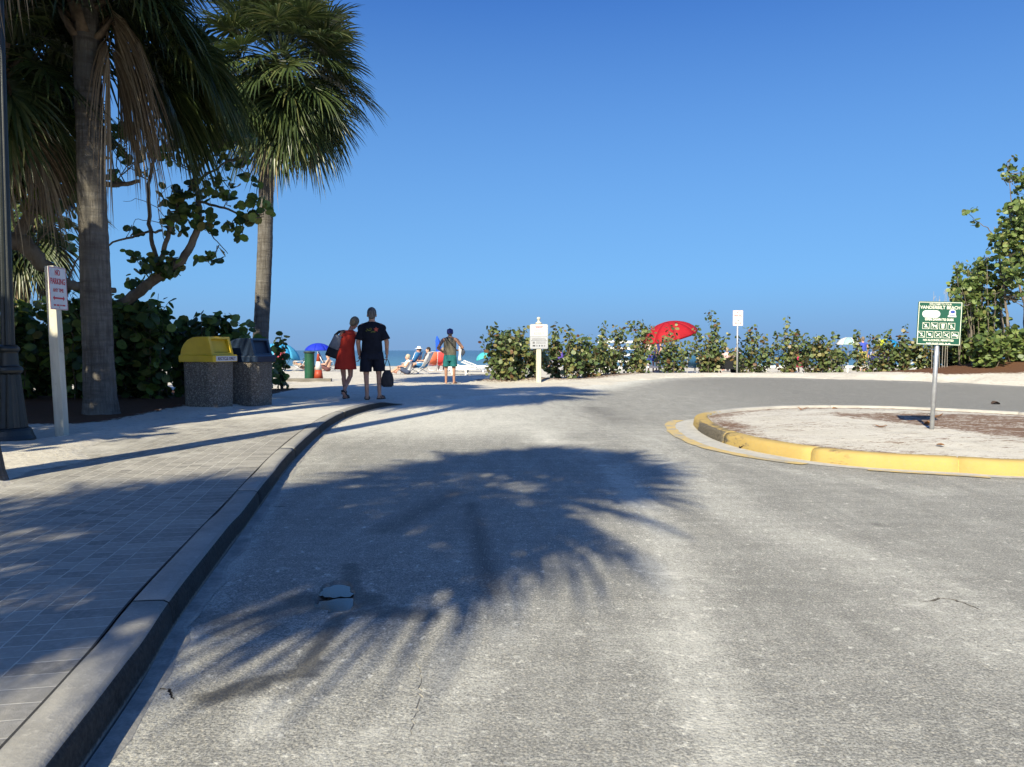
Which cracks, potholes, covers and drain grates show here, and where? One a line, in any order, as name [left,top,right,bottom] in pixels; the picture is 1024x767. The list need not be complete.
crack [409,663,423,737]
pothole [312,580,356,613]
crack [921,597,980,610]
